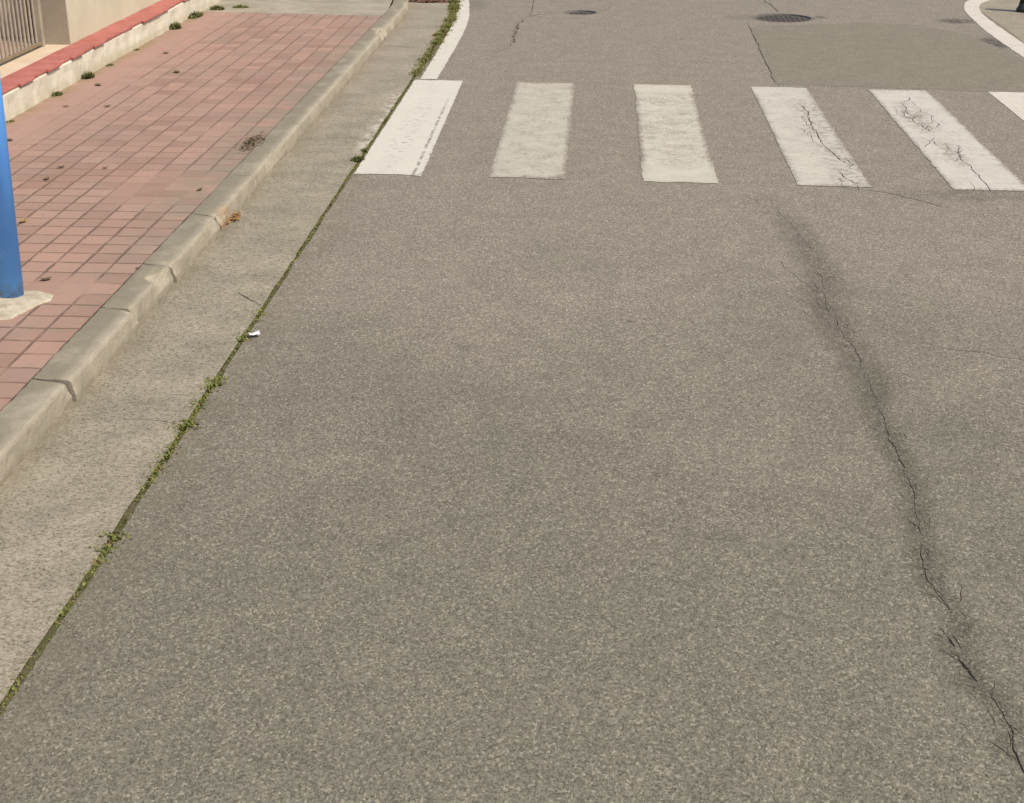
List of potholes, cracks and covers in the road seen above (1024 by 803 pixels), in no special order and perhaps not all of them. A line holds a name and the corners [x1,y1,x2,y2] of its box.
crack [495,0,540,54]
crack [772,203,1024,773]
crack [896,98,990,191]
manhole cover [752,13,814,23]
